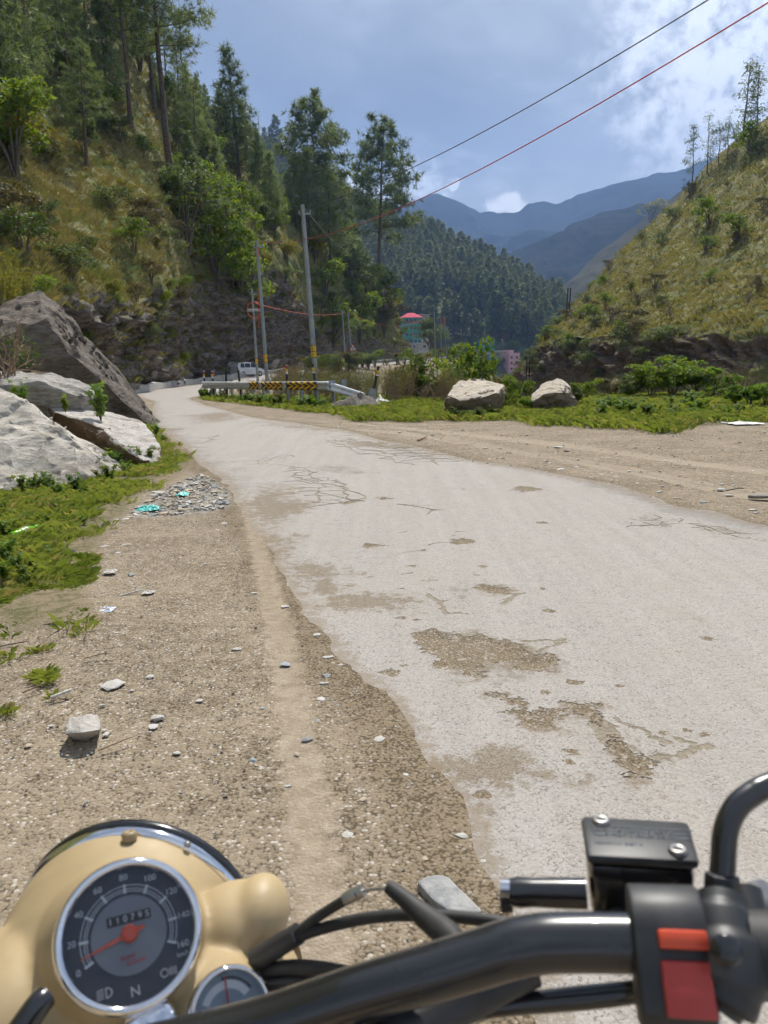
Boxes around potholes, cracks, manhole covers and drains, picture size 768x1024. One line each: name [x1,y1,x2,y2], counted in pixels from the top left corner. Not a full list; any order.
crack [327,435,460,465]
pothole [471,584,512,595]
pothole [603,734,661,780]
pothole [411,628,560,679]
crack [231,455,366,507]
crack [627,515,757,540]
